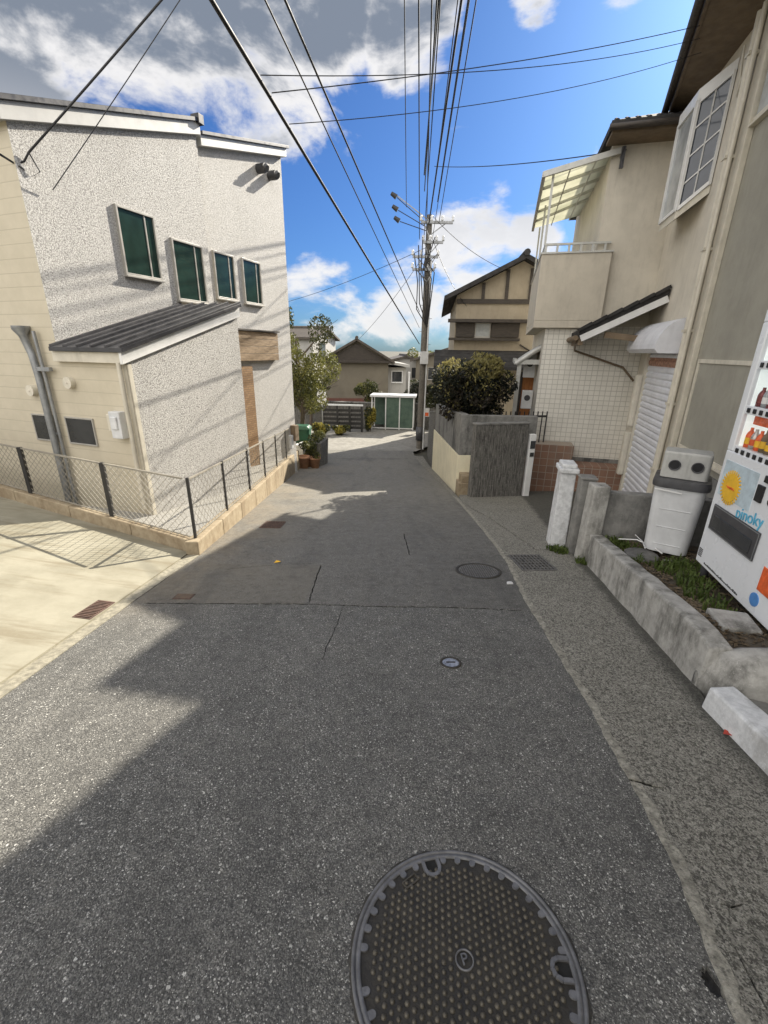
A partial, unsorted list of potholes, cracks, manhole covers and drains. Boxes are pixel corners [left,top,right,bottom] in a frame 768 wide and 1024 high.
pothole [701,971,723,998]
manhole cover [348,849,593,1024]
utility cover [440,656,461,669]
crack [147,563,517,659]
drain grate [508,554,558,571]
drain grate [72,600,115,620]
manhole cover [455,563,502,579]
